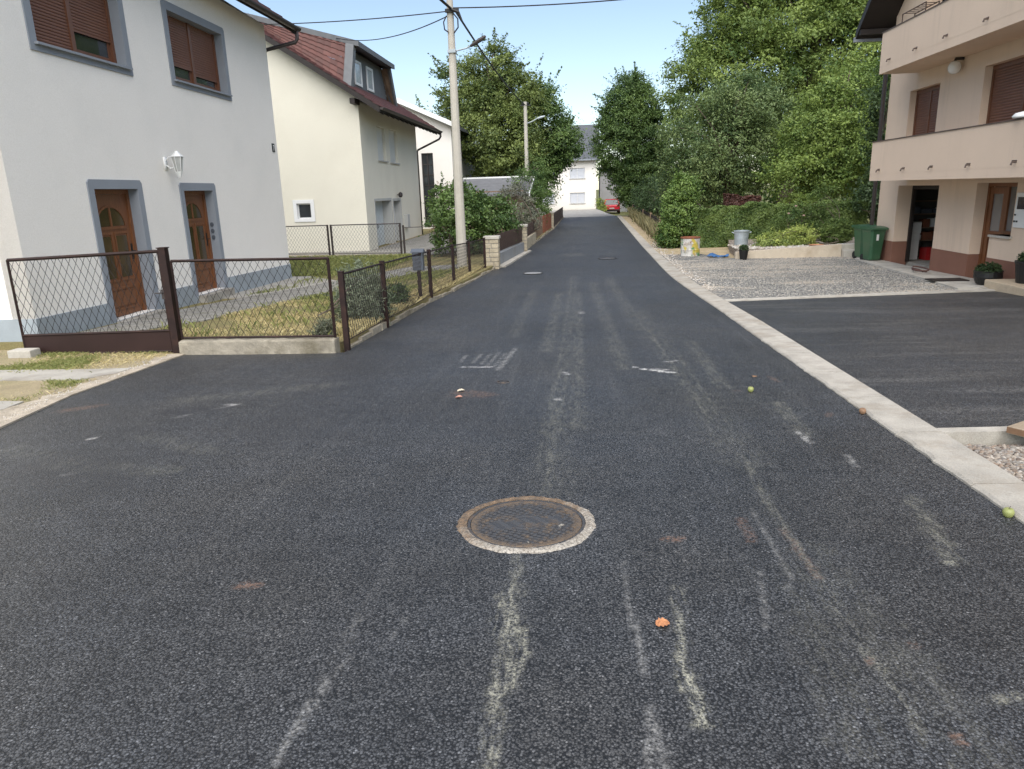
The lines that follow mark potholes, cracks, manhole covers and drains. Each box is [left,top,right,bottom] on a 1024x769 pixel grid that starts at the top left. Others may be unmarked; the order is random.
manhole cover [456,496,596,554]
